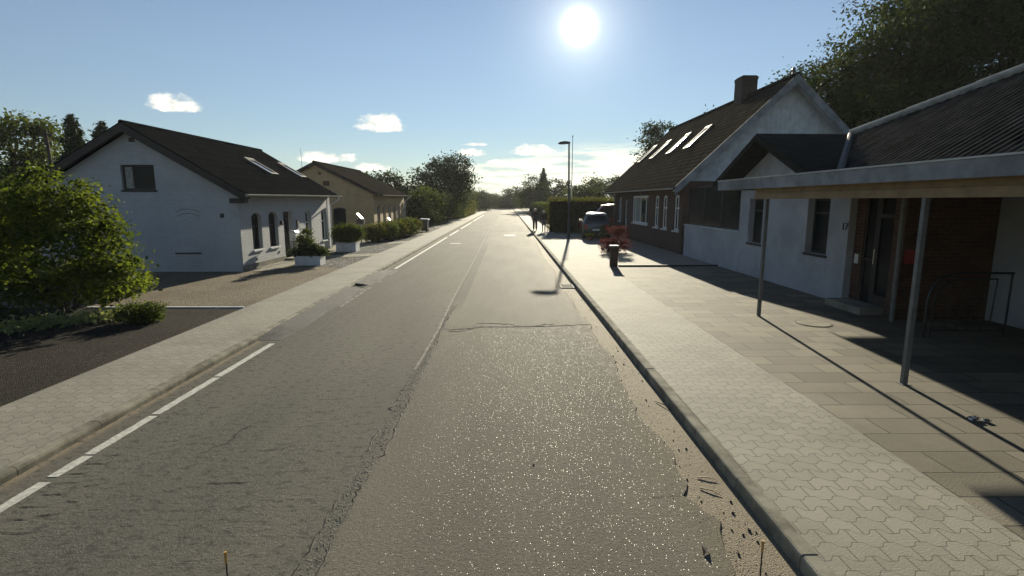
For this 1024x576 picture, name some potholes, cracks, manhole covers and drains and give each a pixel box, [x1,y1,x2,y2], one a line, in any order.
crack [289,221,591,576]
